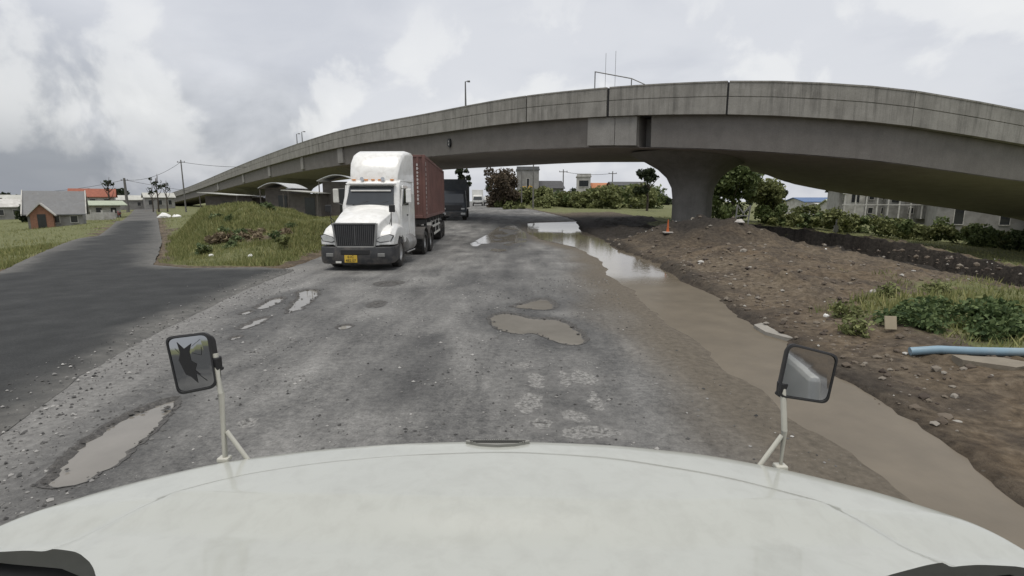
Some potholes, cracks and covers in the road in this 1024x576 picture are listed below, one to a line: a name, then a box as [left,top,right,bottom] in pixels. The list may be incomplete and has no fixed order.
pothole [235,316,272,330]
pothole [251,296,287,309]
pothole [366,300,388,308]
pothole [35,395,182,493]
pothole [284,289,322,314]
pothole [486,311,590,347]
pothole [509,298,560,310]
